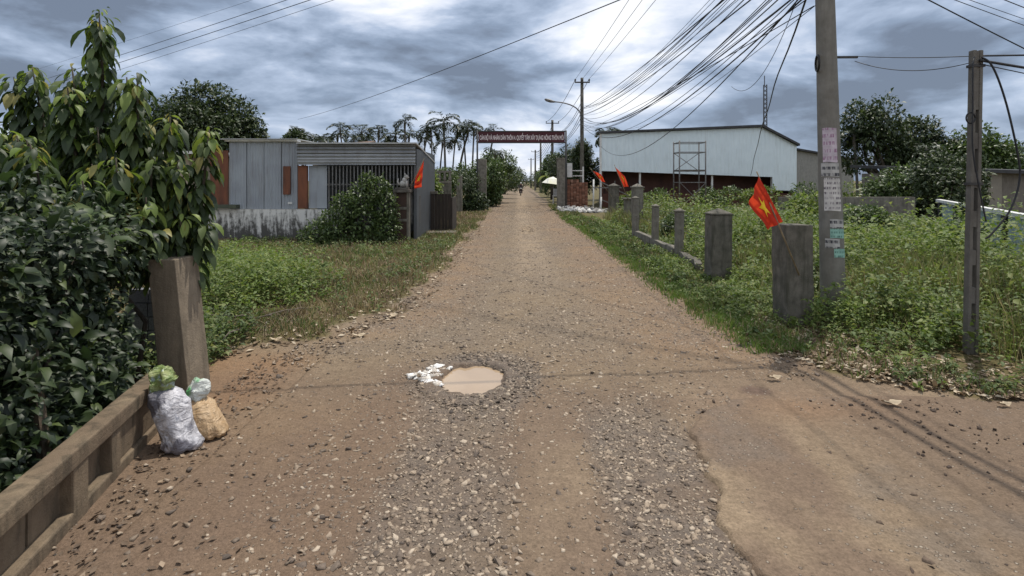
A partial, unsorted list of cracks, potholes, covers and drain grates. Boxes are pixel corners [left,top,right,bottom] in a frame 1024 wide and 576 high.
pothole [417,356,526,406]
